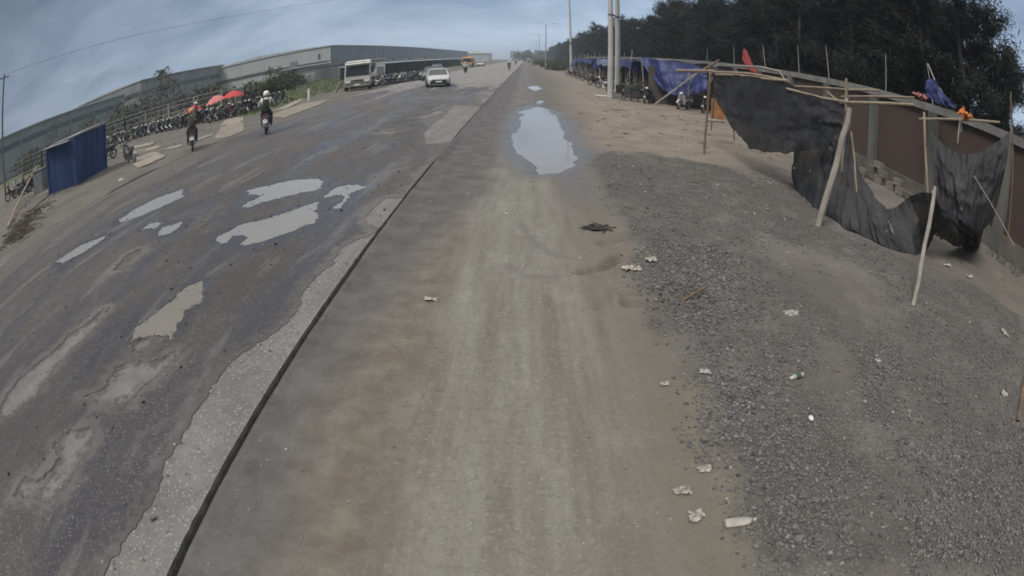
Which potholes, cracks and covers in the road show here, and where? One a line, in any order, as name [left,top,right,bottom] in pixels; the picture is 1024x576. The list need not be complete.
pothole [12,426,95,503]
pothole [131,280,205,340]
pothole [84,350,176,405]
